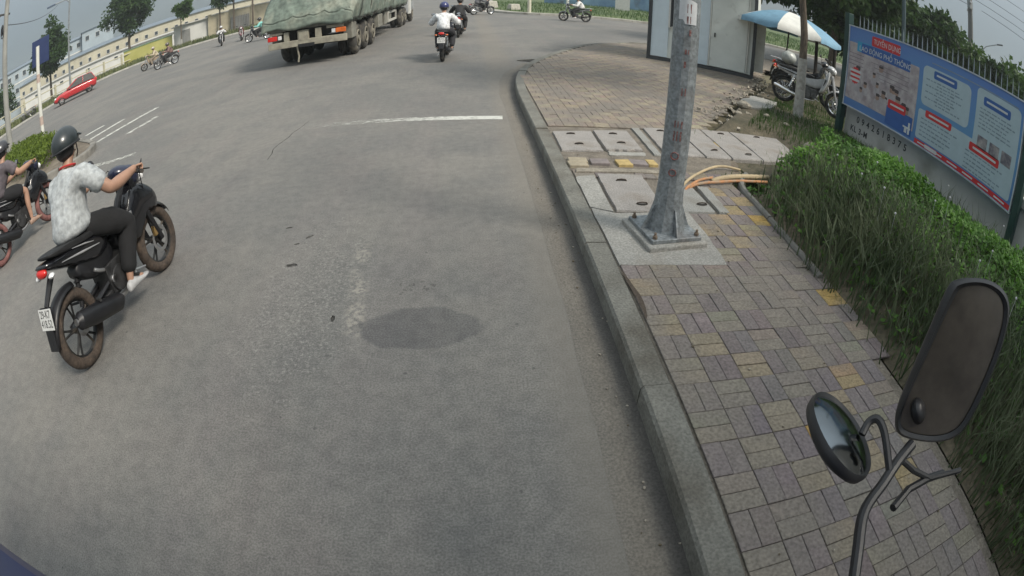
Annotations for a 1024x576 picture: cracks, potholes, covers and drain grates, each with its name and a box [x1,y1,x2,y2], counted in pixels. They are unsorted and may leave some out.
manhole cover [553,131,604,152]
manhole cover [643,128,705,158]
manhole cover [631,128,661,157]
manhole cover [597,174,655,213]
manhole cover [593,130,643,152]
